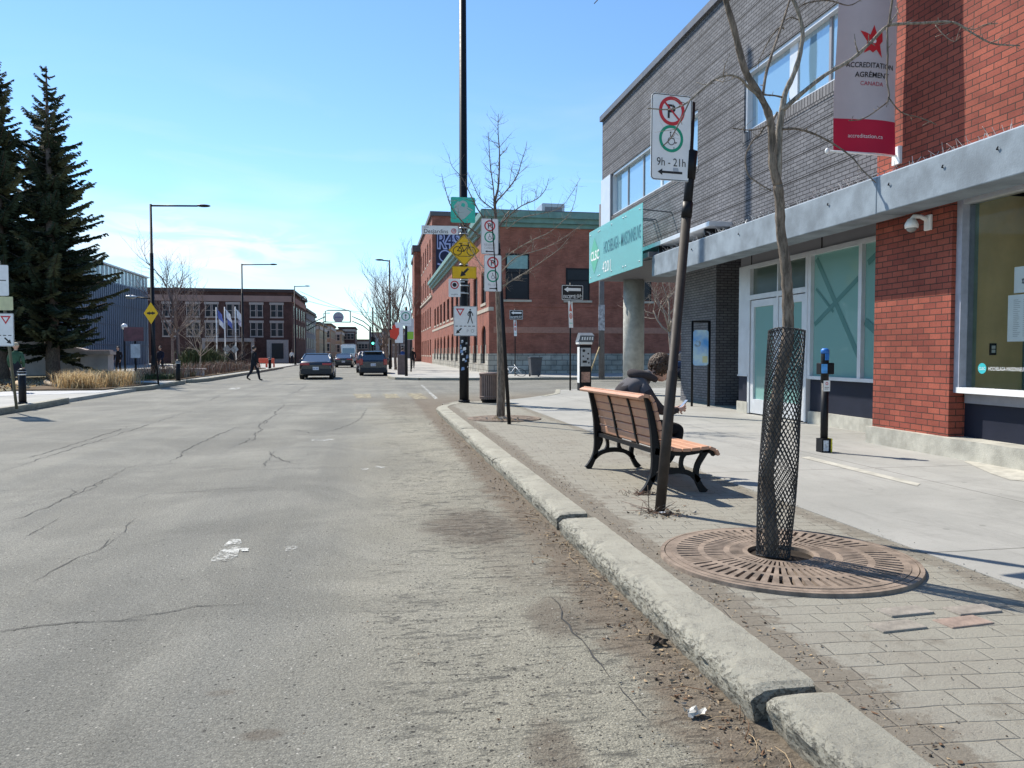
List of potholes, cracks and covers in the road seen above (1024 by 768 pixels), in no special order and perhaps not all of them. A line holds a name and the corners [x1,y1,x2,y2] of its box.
crack [3,602,264,631]
crack [16,469,124,535]
crack [170,387,367,470]
crack [553,598,650,721]
